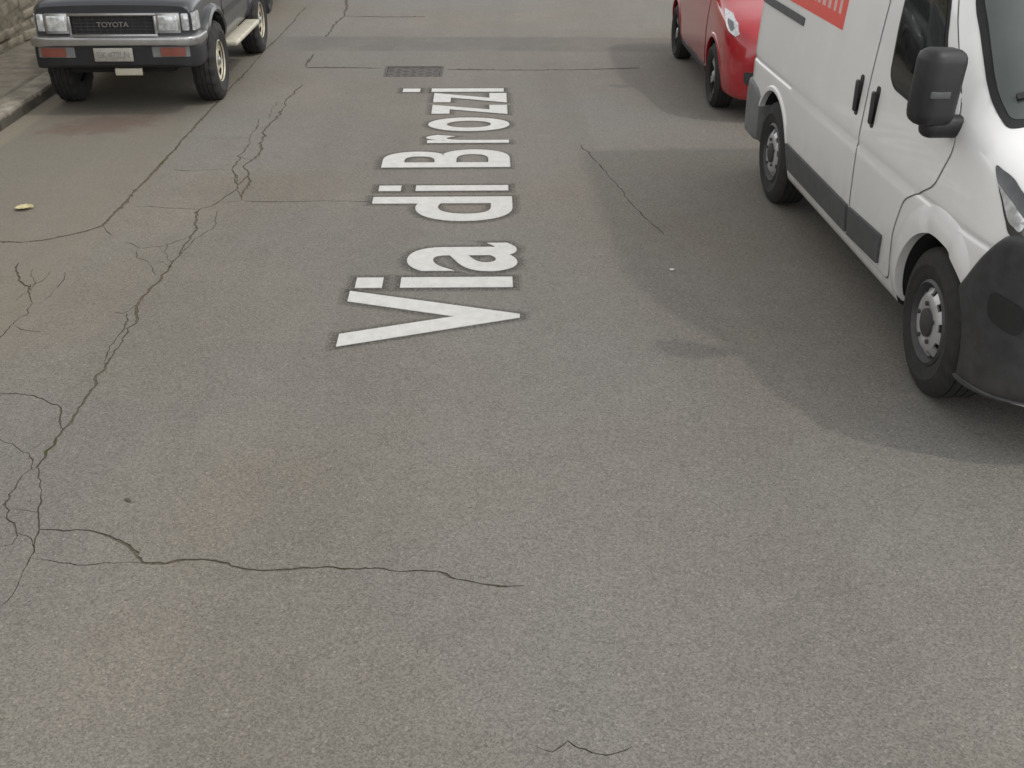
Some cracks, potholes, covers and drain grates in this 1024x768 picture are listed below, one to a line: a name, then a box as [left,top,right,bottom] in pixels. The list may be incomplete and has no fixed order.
crack [325,0,416,37]
crack [540,707,632,756]
crack [581,145,664,235]
crack [0,7,512,606]
